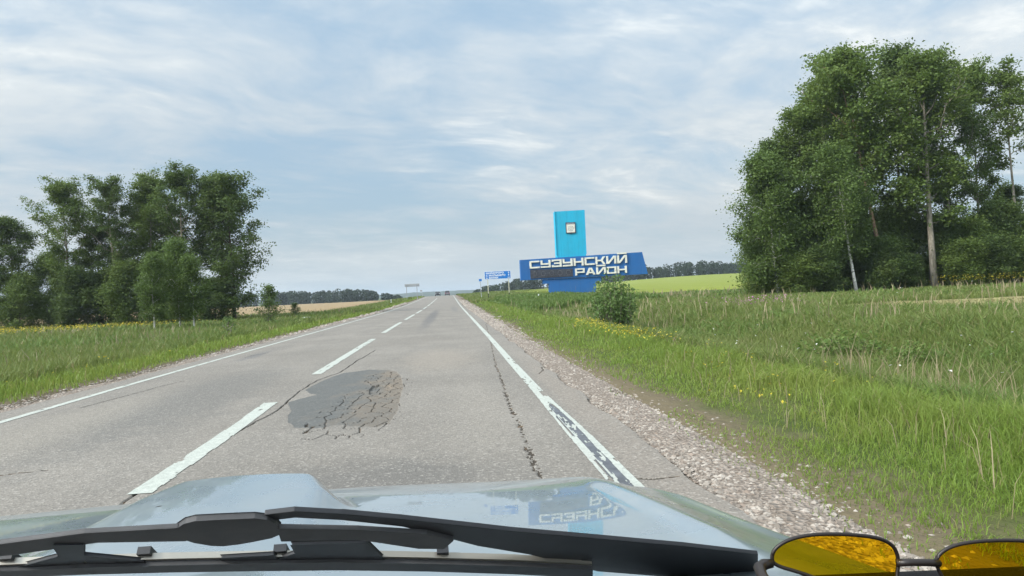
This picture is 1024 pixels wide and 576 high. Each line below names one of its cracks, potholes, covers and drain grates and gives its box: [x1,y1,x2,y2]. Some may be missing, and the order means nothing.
crack [123,351,411,504]
